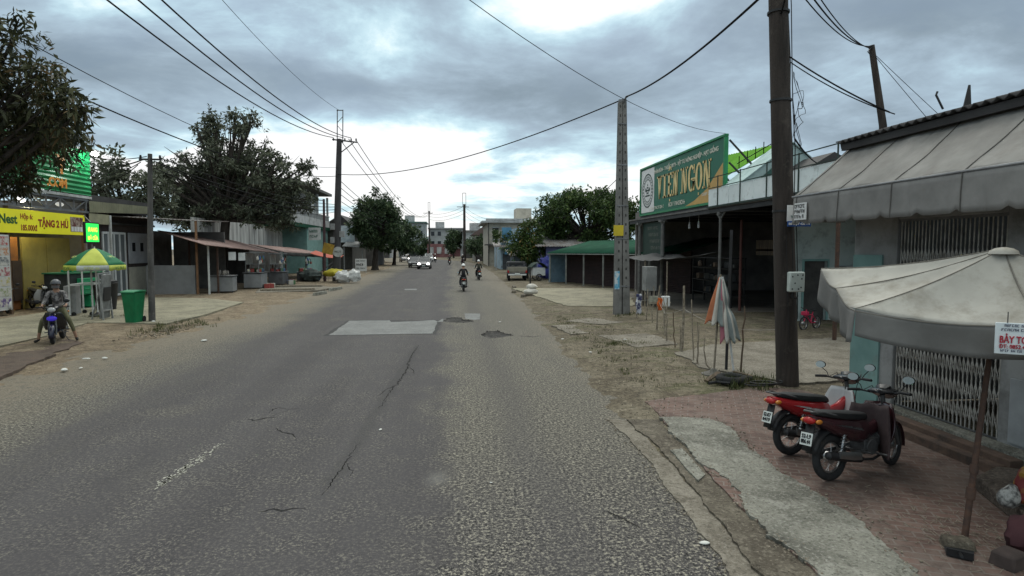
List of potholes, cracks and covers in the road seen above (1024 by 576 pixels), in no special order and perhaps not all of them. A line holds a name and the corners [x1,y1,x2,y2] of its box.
pothole [481,330,513,338]
crack [248,408,298,437]
crack [379,345,419,407]
crack [322,443,360,495]
